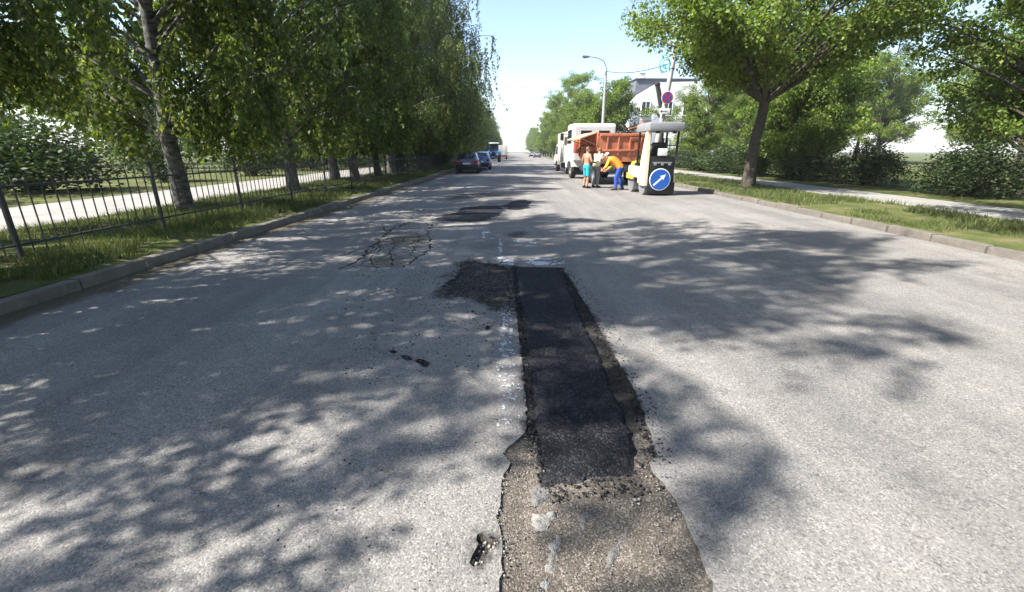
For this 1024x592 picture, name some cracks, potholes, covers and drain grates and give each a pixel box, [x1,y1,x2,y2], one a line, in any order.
crack [339,219,434,269]
